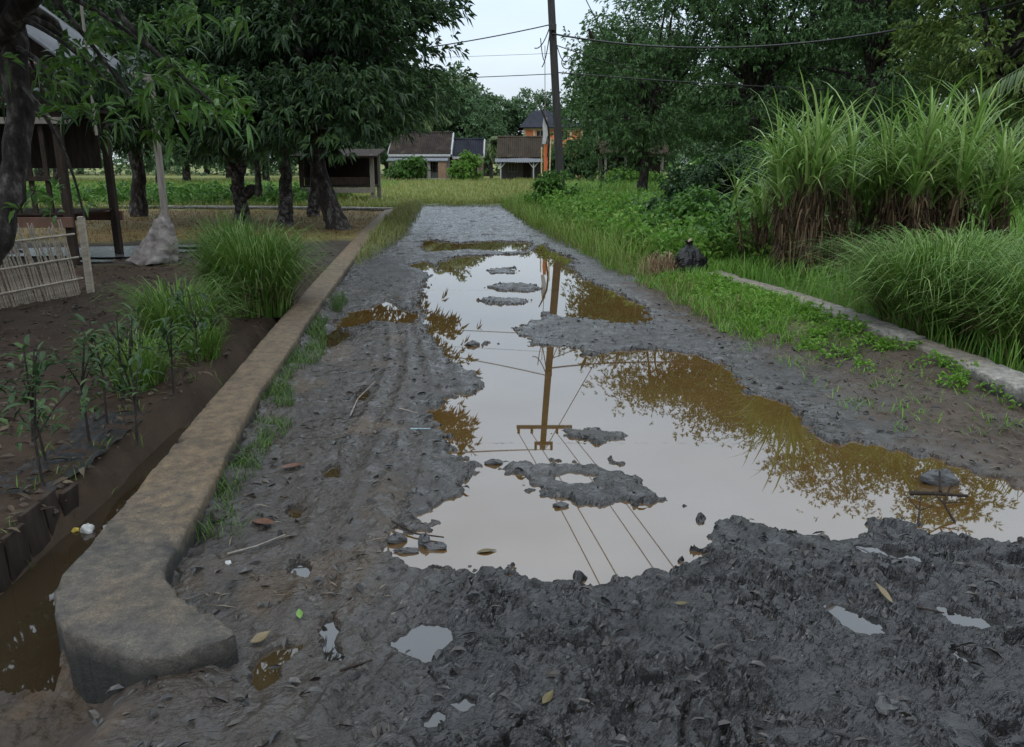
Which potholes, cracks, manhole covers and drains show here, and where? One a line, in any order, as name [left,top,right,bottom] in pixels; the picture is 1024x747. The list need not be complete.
pothole [381,613,462,665]
pothole [378,243,1024,586]
pothole [235,634,312,694]
pothole [816,598,897,642]
pothole [329,296,423,330]
pothole [416,239,534,252]
pothole [929,600,1015,630]
